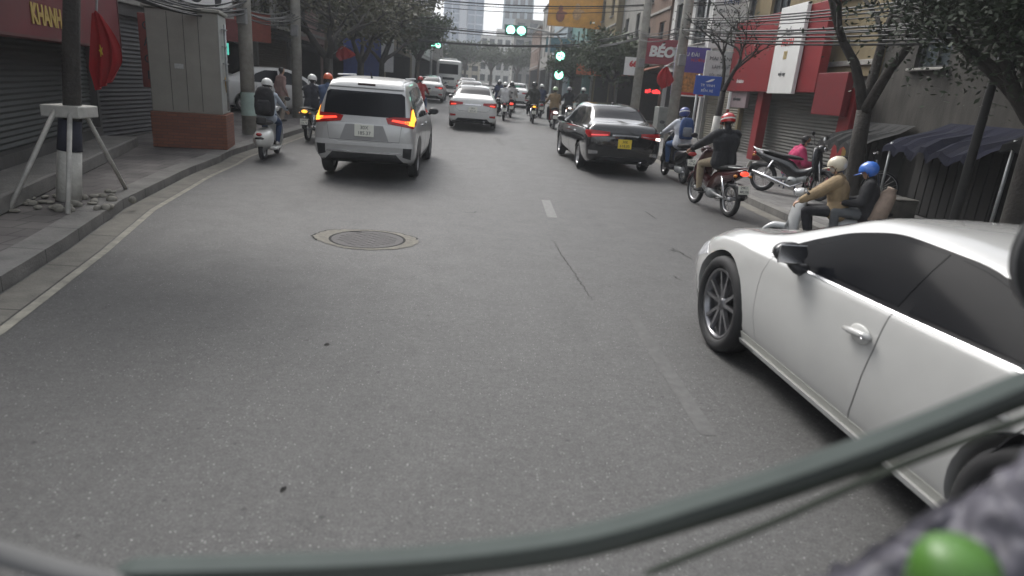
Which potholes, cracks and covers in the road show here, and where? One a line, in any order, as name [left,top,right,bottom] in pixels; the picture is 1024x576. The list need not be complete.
manhole cover [310,229,419,250]
